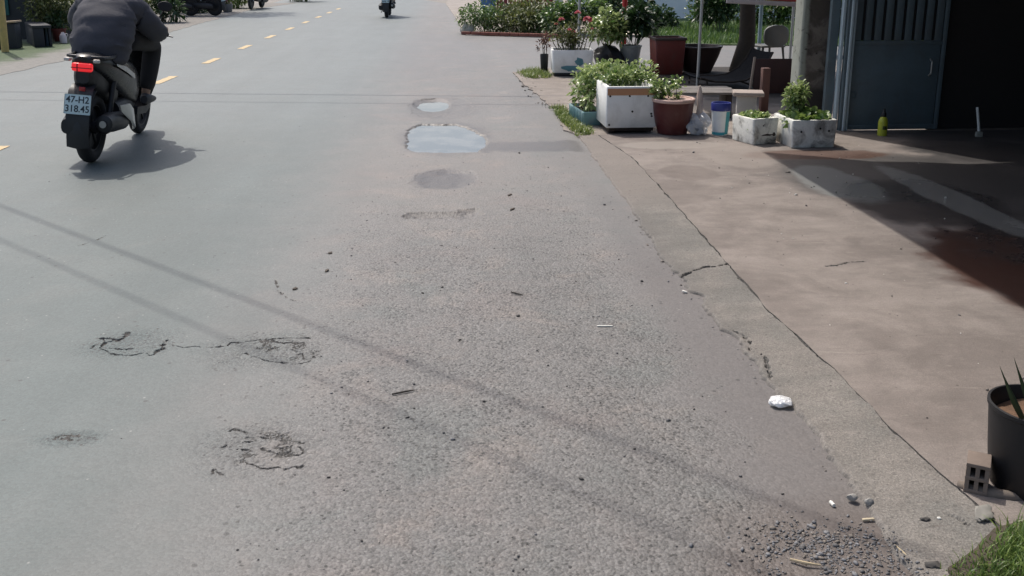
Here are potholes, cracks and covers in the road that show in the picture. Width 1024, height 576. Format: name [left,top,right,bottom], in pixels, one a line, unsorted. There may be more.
pothole [408,98,474,119]
pothole [405,124,488,153]
crack [211,428,305,476]
crack [680,263,727,278]
crack [734,331,773,378]
crack [91,332,315,365]
